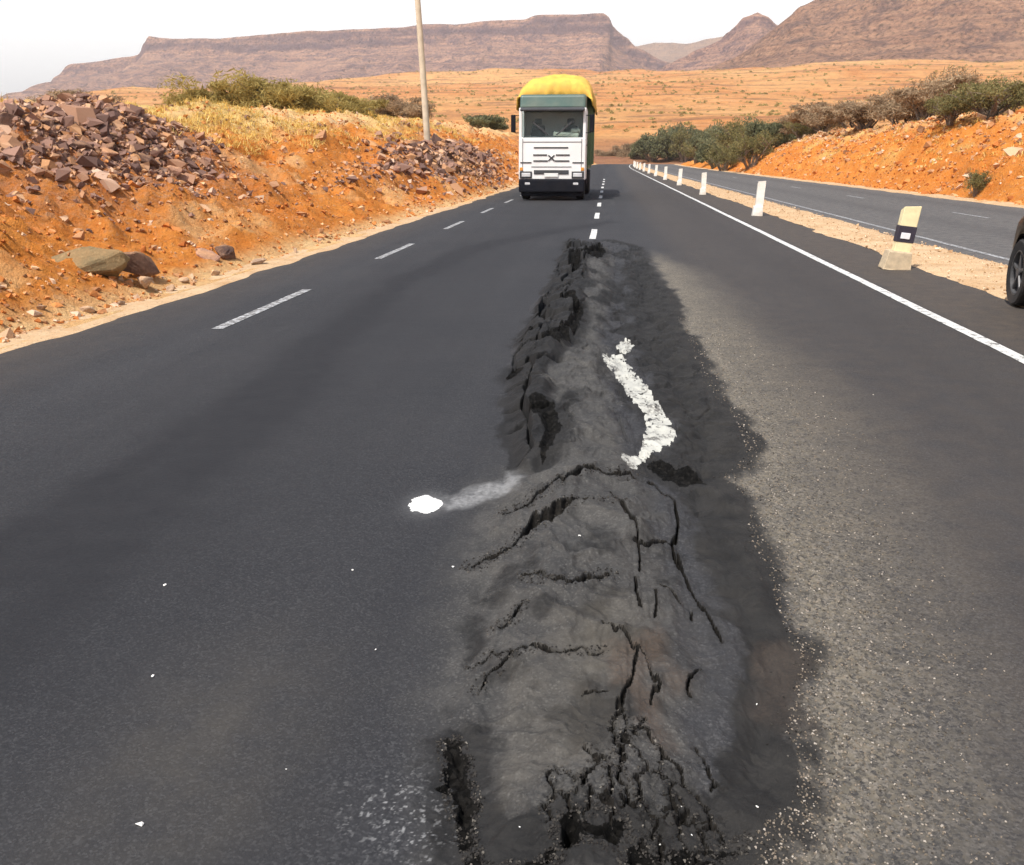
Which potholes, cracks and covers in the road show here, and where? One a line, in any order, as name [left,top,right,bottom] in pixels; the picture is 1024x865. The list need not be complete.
pothole [434,739,556,865]
pothole [626,839,749,865]
pothole [581,242,606,258]
crack [471,463,723,864]
pothole [647,459,706,487]
pothole [541,323,571,343]
pothole [559,289,583,335]
pothole [568,247,582,273]
pothole [558,806,626,850]
pothole [528,391,562,465]
